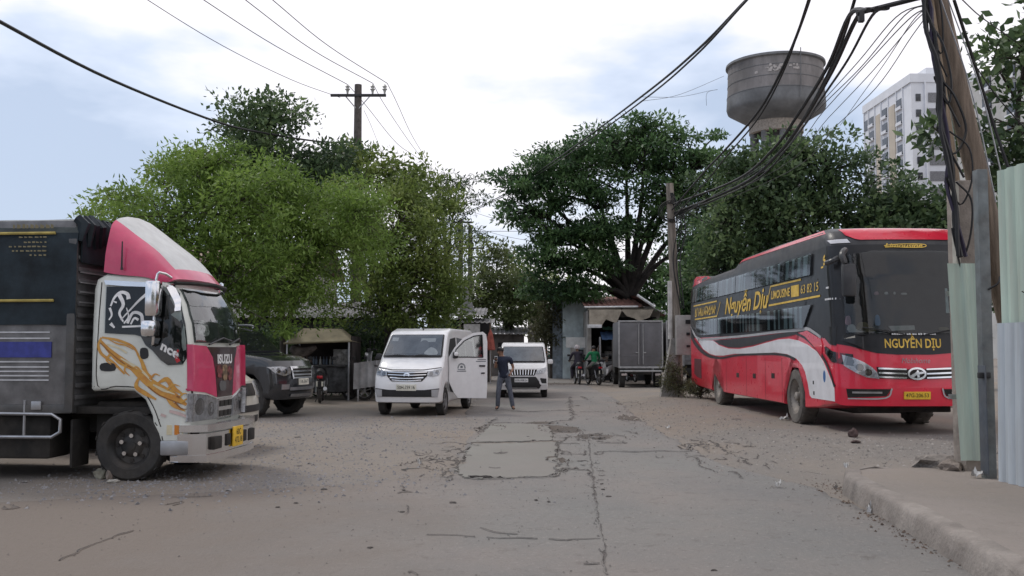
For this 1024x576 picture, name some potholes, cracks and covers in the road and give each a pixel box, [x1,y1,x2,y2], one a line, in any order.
crack [397,396,776,514]
crack [59,530,134,560]
crack [426,527,601,541]
